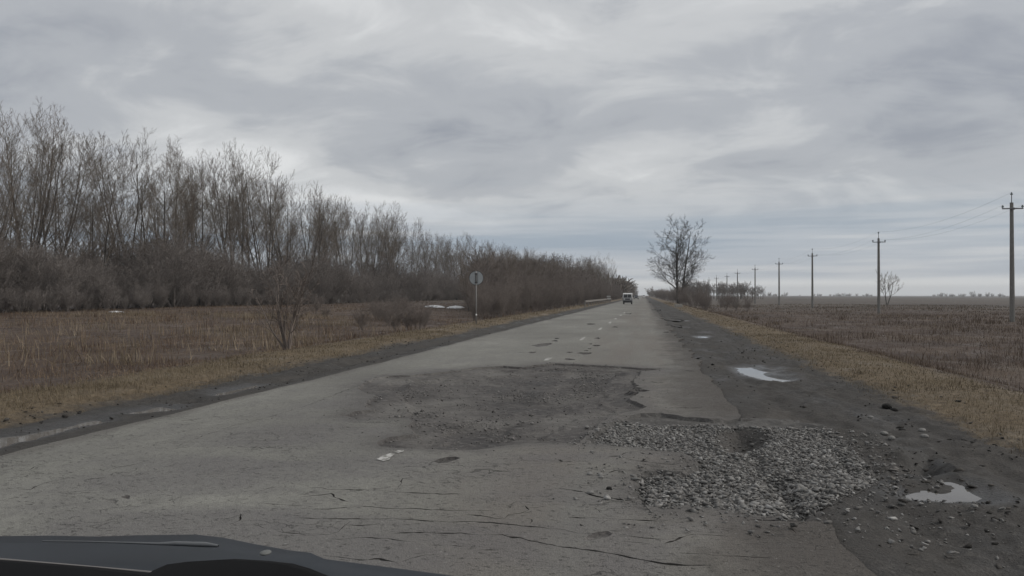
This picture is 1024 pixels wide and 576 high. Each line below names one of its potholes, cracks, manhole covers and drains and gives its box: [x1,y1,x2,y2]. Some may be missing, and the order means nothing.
pothole [345,363,658,450]
pothole [589,413,881,521]
crack [260,466,768,566]
